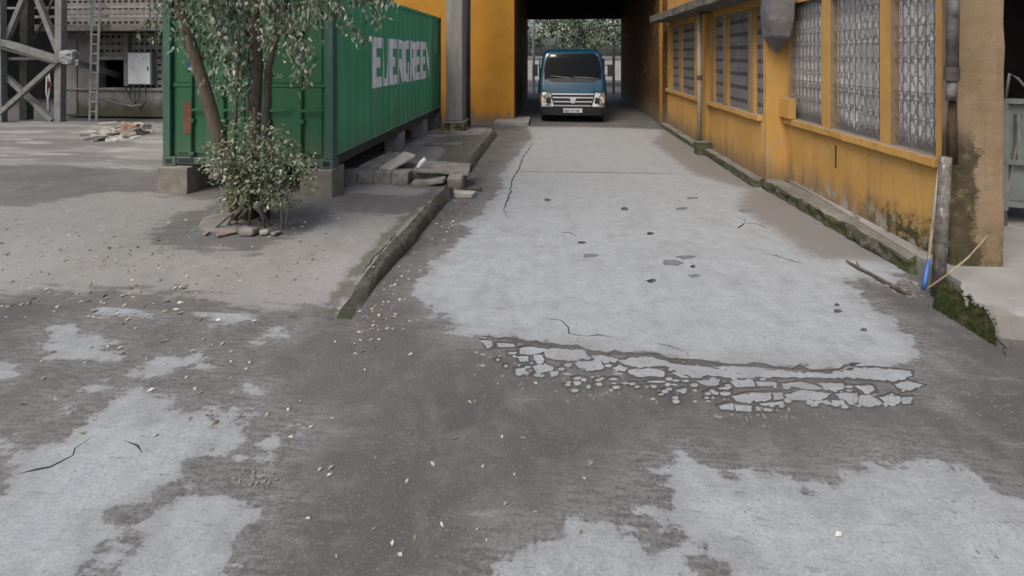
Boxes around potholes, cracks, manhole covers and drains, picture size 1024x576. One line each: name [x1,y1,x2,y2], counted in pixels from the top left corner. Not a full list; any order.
crack [18,436,93,474]
crack [471,318,927,415]
crack [503,147,531,216]
